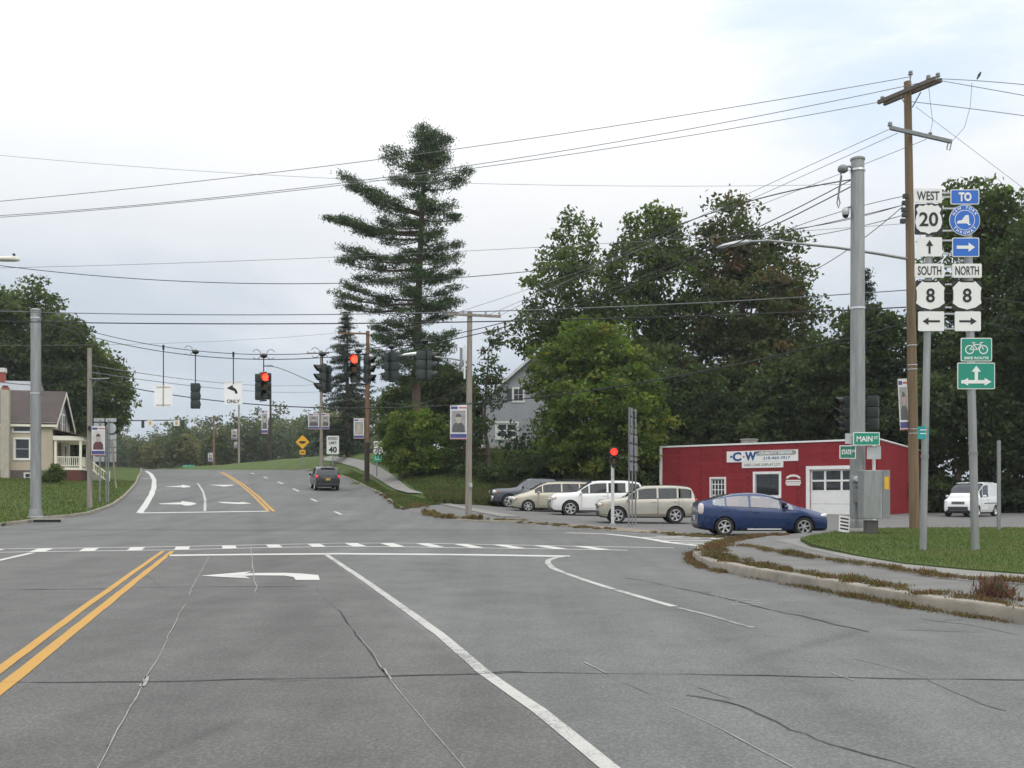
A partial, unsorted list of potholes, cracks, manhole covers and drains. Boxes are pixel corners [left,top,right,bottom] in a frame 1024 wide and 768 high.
crack [629,578,869,632]
crack [43,658,1024,768]
